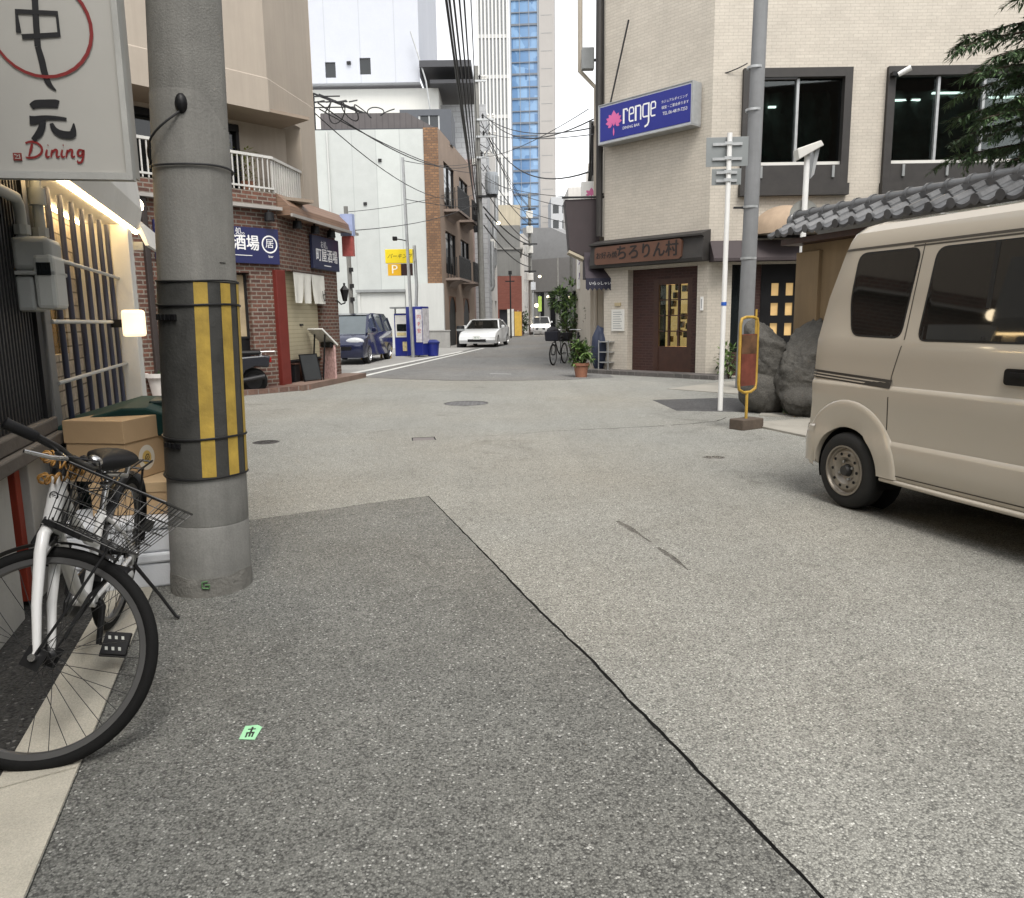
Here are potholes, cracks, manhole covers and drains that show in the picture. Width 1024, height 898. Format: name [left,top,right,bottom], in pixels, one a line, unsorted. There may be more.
crack [616,521,688,570]
